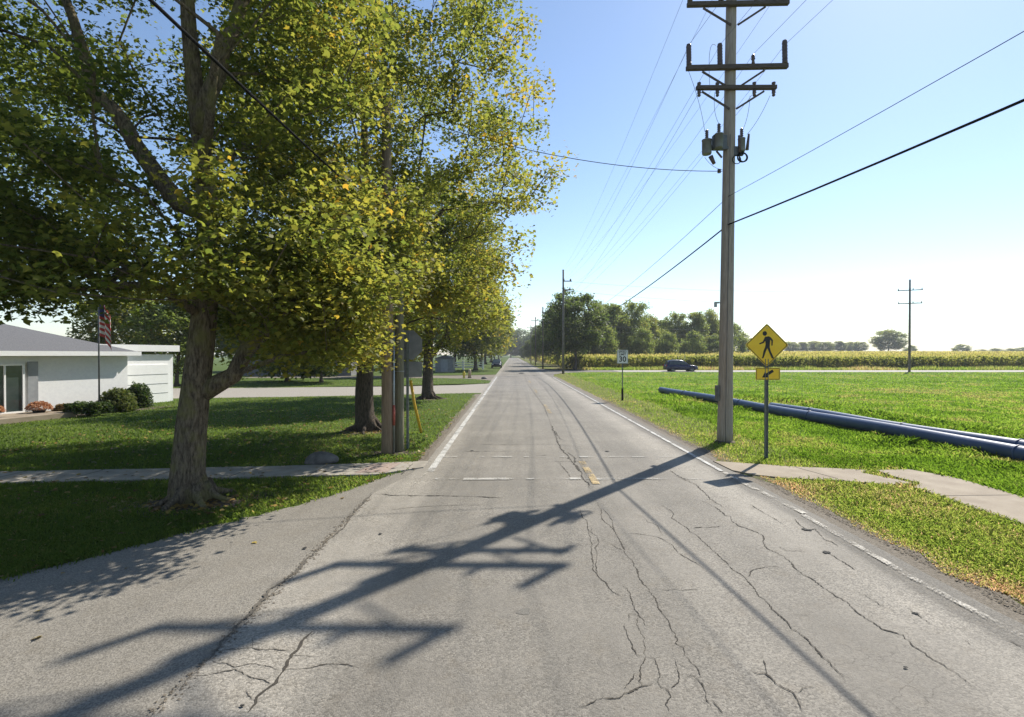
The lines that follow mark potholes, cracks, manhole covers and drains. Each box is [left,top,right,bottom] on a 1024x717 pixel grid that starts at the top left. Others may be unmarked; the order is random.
crack [192,632,357,713]
crack [580,470,982,711]
crack [373,493,503,509]
